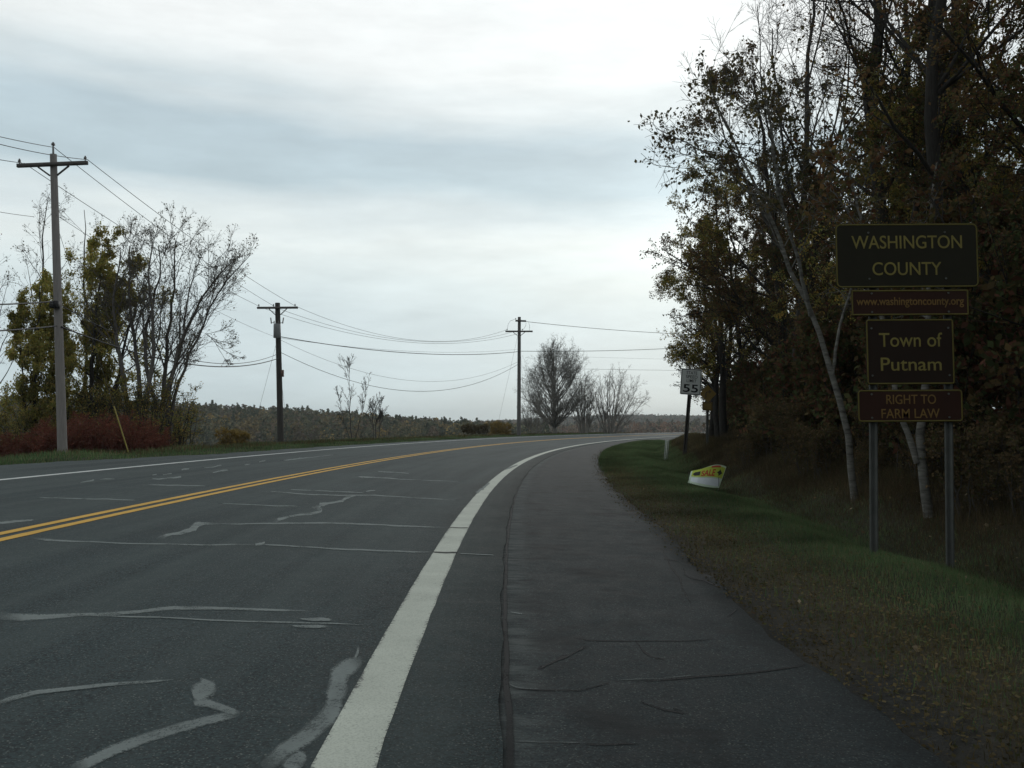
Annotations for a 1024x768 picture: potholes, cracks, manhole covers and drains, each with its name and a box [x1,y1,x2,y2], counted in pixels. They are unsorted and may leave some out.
crack [510,638,801,691]
crack [642,702,685,714]
